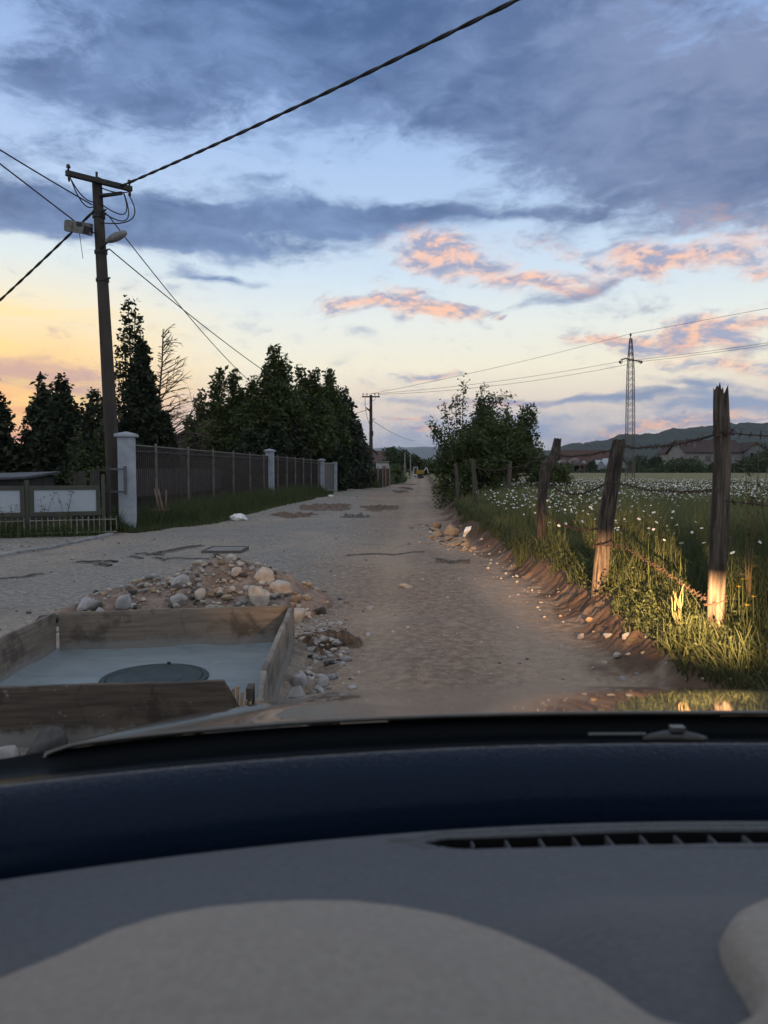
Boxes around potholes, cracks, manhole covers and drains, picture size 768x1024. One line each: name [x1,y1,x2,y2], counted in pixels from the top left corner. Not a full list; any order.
manhole cover [201,546,249,554]
crack [73,544,208,567]
manhole cover [98,661,209,683]
pothole [299,503,352,511]
pothole [360,504,399,512]
